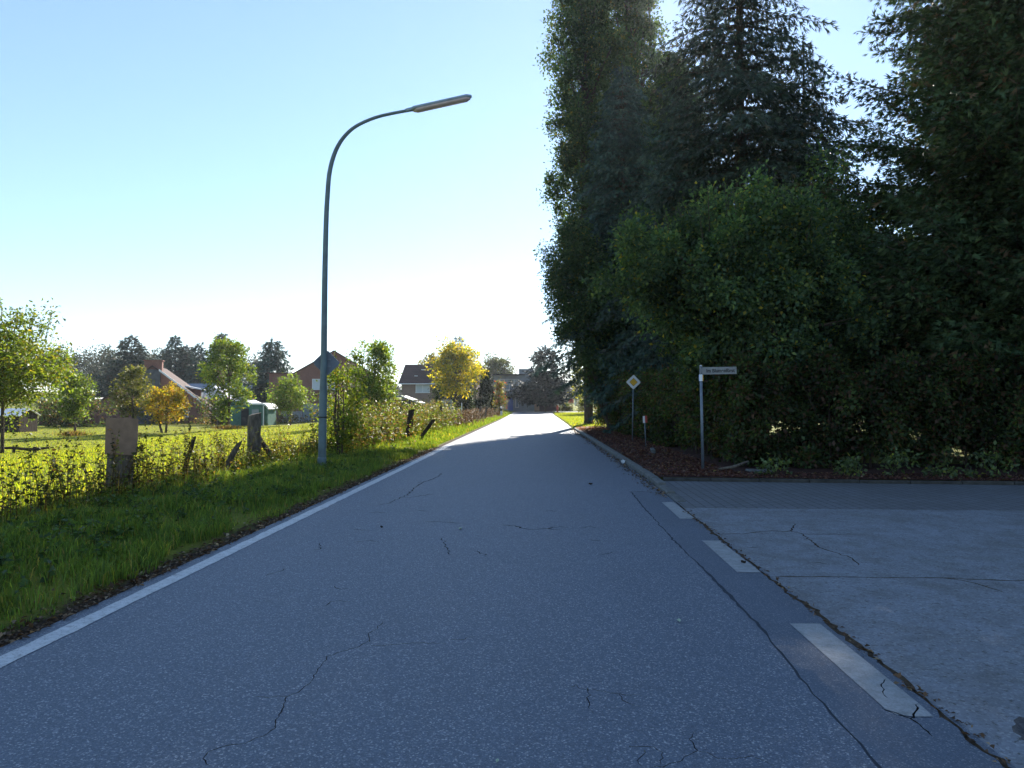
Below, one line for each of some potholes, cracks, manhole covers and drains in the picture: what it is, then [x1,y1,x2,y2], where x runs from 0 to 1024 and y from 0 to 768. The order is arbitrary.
crack [629,734,772,768]
crack [203,622,440,765]
crack [680,506,1010,768]
crack [357,473,441,542]
